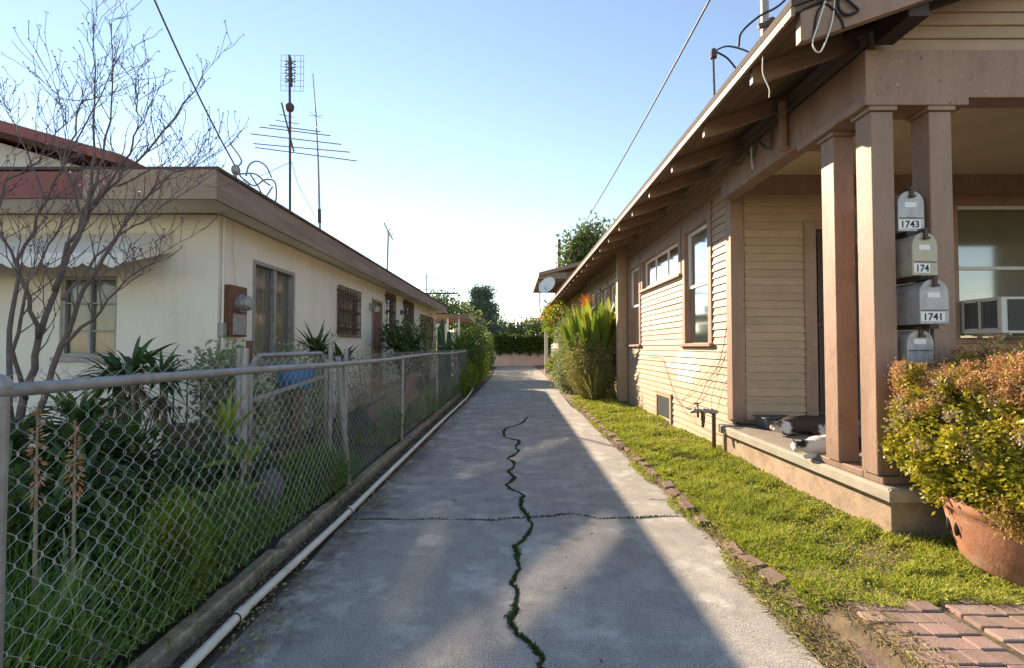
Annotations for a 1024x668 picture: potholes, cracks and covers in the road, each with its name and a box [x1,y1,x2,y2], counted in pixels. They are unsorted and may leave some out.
crack [348,414,686,668]
